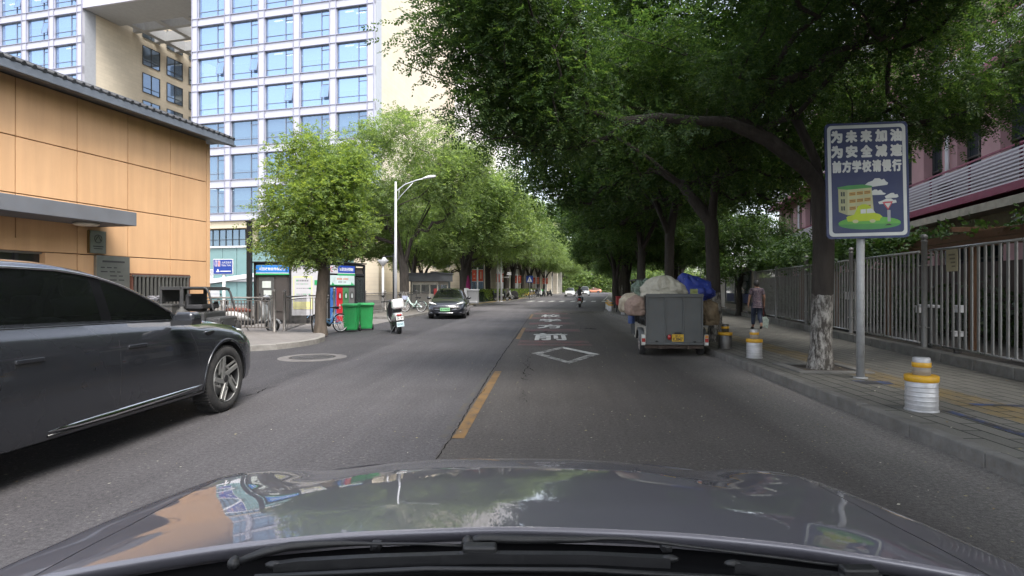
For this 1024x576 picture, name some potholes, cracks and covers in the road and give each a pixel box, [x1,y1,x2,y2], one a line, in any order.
manhole cover [277,354,347,362]
